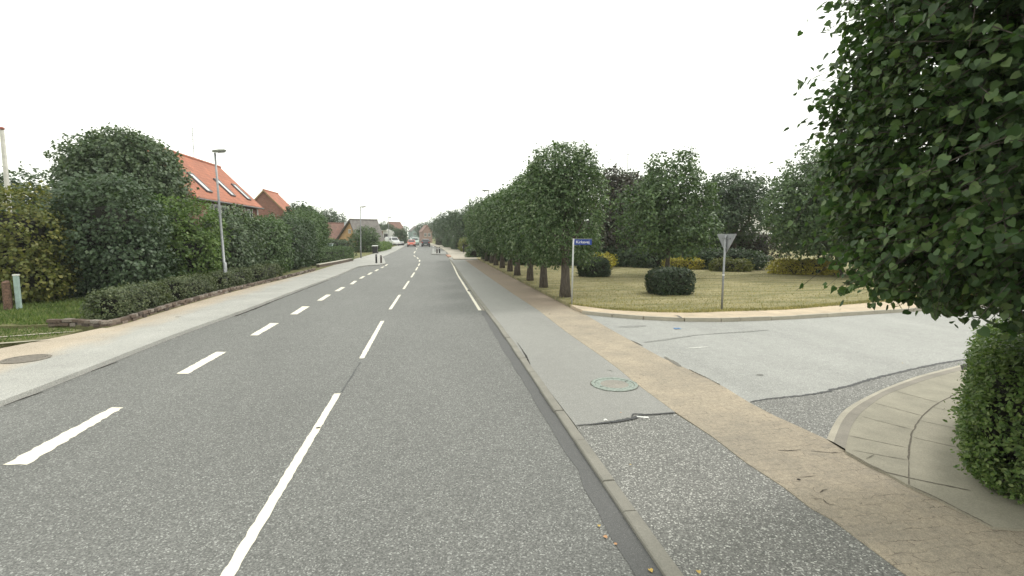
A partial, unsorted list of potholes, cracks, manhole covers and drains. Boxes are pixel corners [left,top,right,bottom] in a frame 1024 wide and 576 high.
manhole cover [0,354,52,364]
manhole cover [590,377,639,392]
